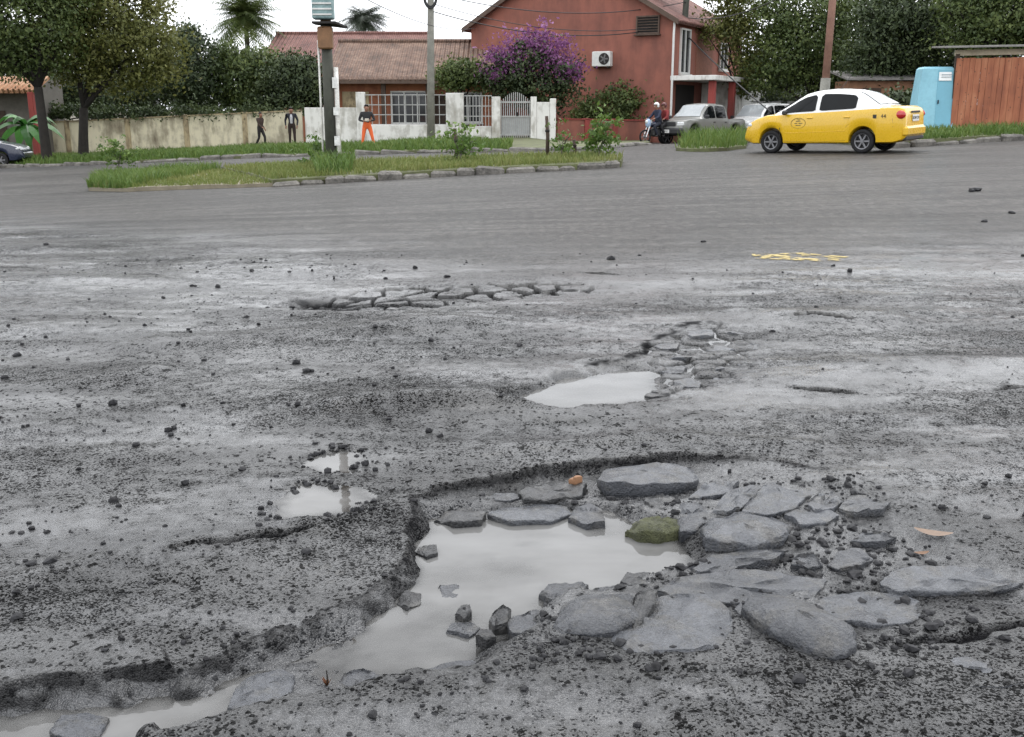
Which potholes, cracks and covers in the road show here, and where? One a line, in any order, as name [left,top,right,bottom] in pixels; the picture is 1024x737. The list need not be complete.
pothole [0,450,1024,737]
crack [173,523,315,548]
crack [793,386,855,394]
crack [897,619,1024,648]
pothole [479,319,786,408]
crack [794,311,854,319]
